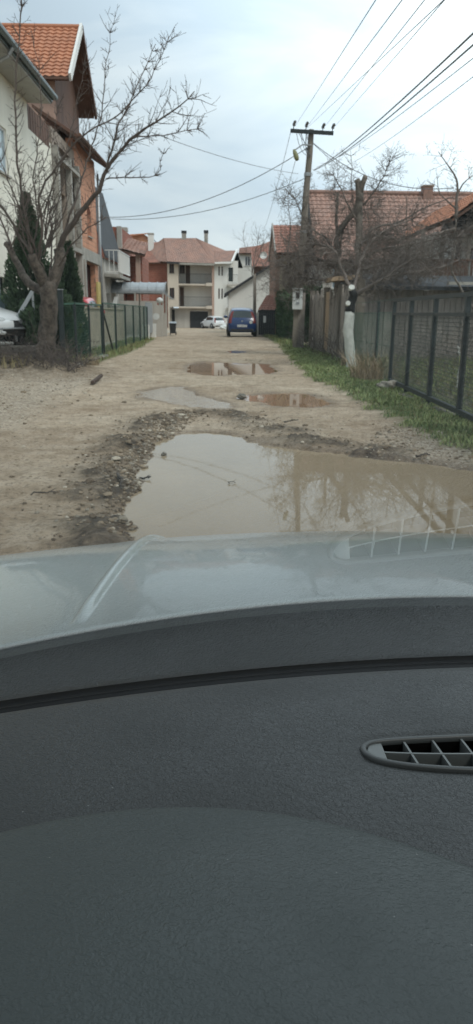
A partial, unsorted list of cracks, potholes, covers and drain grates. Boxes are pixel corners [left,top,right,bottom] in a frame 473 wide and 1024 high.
pothole [183,361,282,376]
pothole [136,386,240,409]
pothole [237,391,335,408]
pothole [102,430,473,544]
